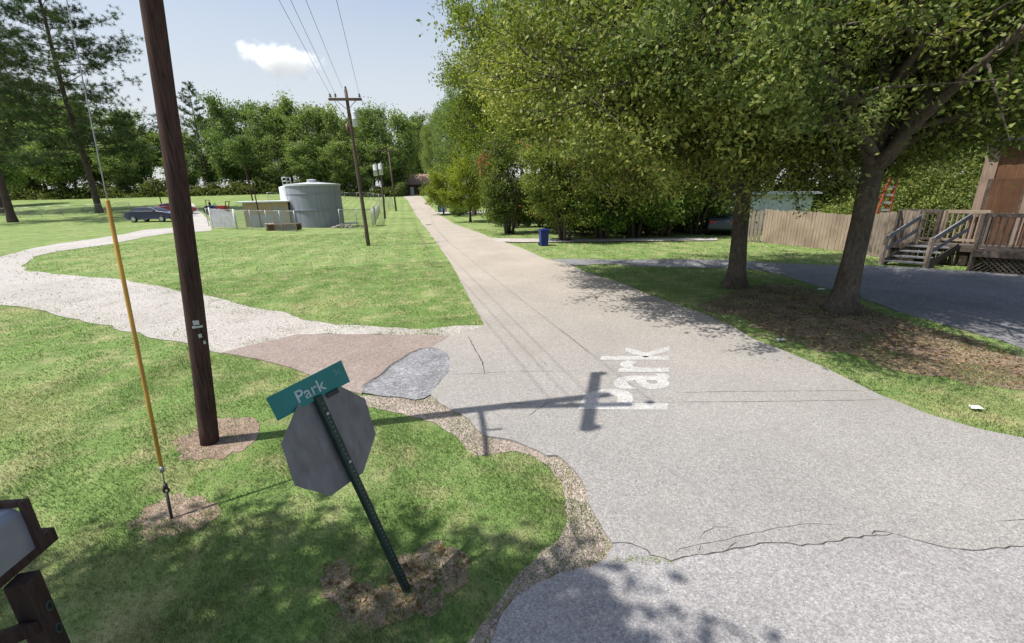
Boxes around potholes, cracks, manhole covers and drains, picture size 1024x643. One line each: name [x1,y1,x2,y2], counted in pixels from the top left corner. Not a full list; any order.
crack [452,336,547,375]
crack [613,523,1024,562]
